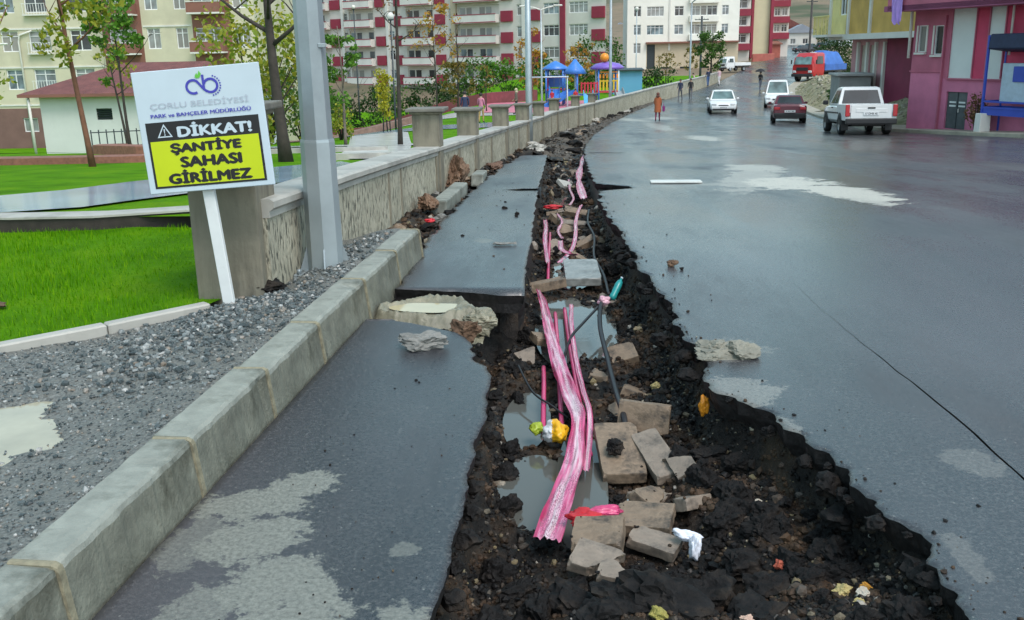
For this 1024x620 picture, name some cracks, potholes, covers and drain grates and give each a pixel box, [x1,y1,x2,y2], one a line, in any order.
pothole [374,294,500,361]
